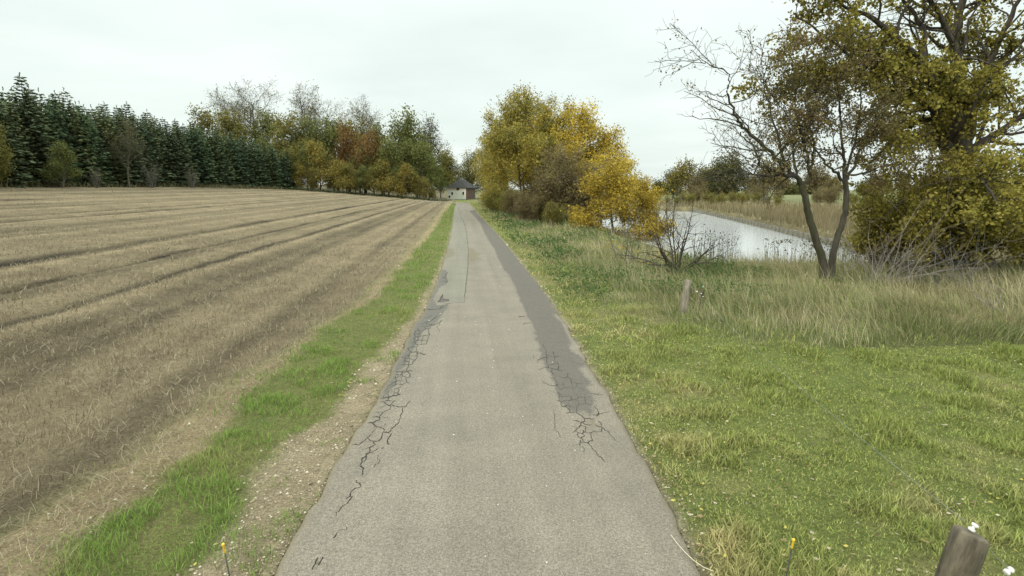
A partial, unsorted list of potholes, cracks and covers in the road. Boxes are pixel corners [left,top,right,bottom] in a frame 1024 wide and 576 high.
crack [533,344,615,462]
crack [333,303,452,538]
